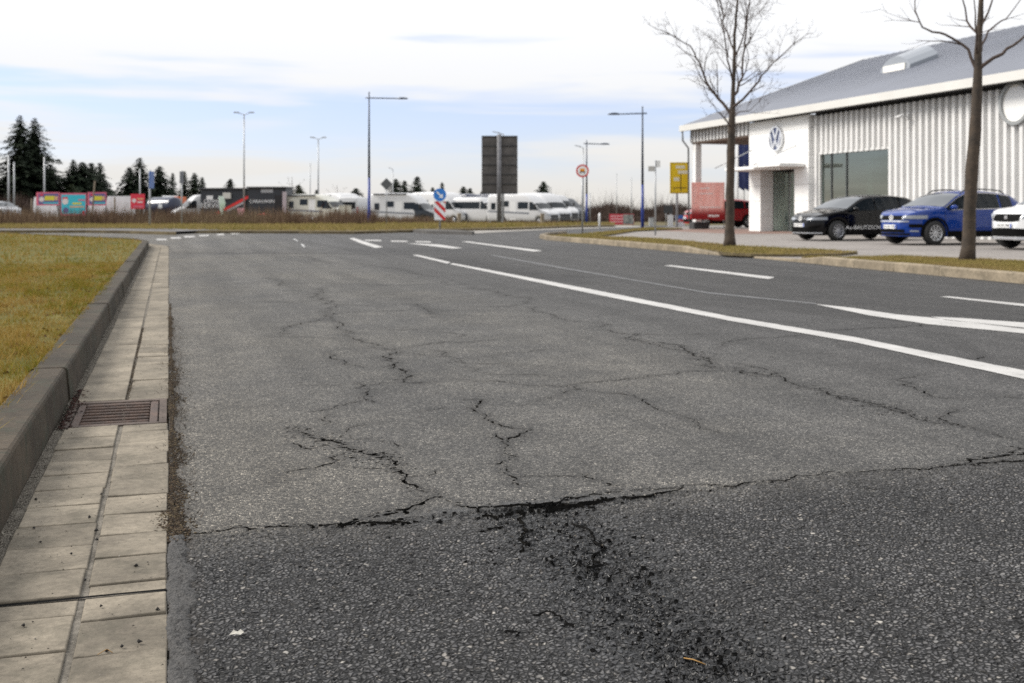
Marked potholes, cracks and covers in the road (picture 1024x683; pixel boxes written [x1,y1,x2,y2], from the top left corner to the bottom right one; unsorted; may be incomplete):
drain grate [61,398,167,430]
crack [268,268,1012,492]
